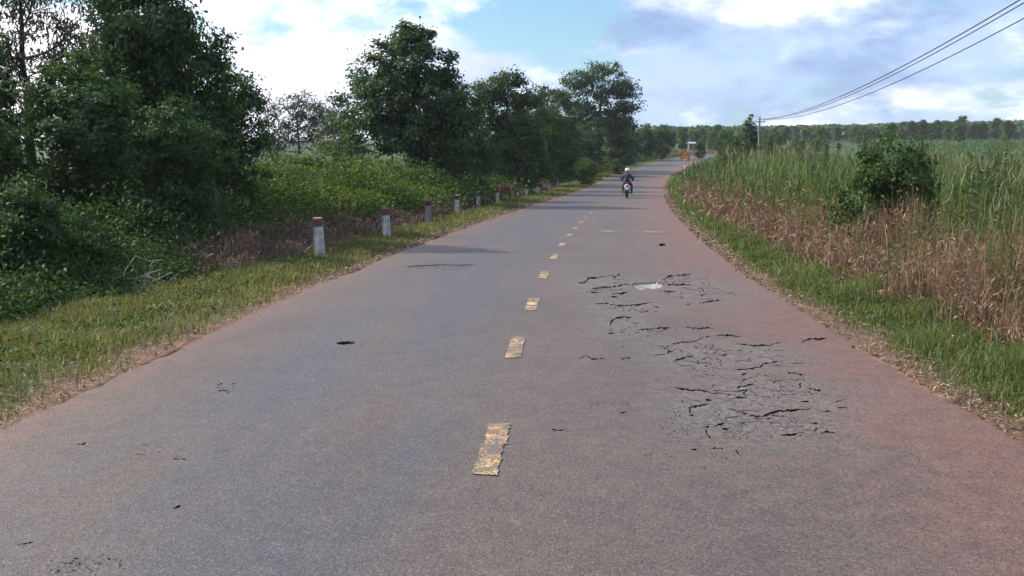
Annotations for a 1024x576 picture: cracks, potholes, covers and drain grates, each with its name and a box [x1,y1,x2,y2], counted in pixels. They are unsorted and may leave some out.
crack [47,556,125,575]
pothole [631,282,662,290]
crack [578,273,846,469]
